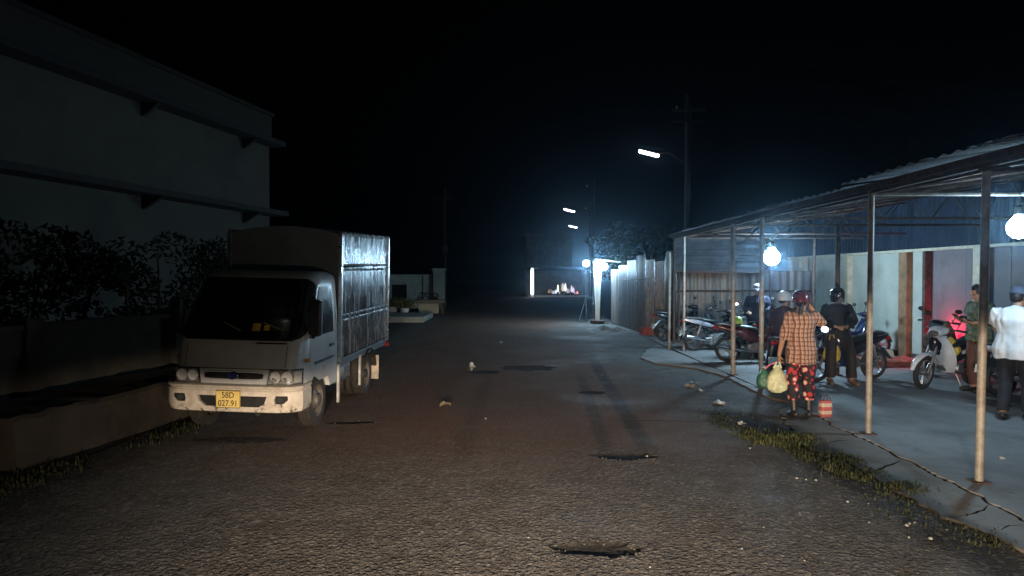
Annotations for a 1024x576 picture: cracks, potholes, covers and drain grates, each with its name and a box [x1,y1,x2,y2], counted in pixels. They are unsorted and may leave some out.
pothole [543,538,657,559]
pothole [588,452,660,461]
